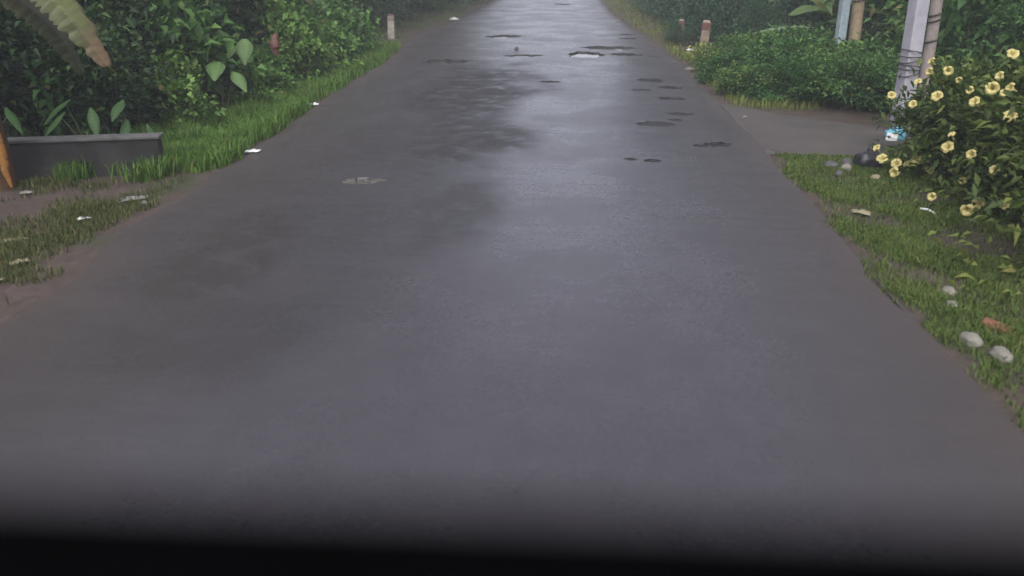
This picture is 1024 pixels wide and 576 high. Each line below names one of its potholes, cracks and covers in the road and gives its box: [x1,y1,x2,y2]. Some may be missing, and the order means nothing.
pothole [339,177,386,185]
